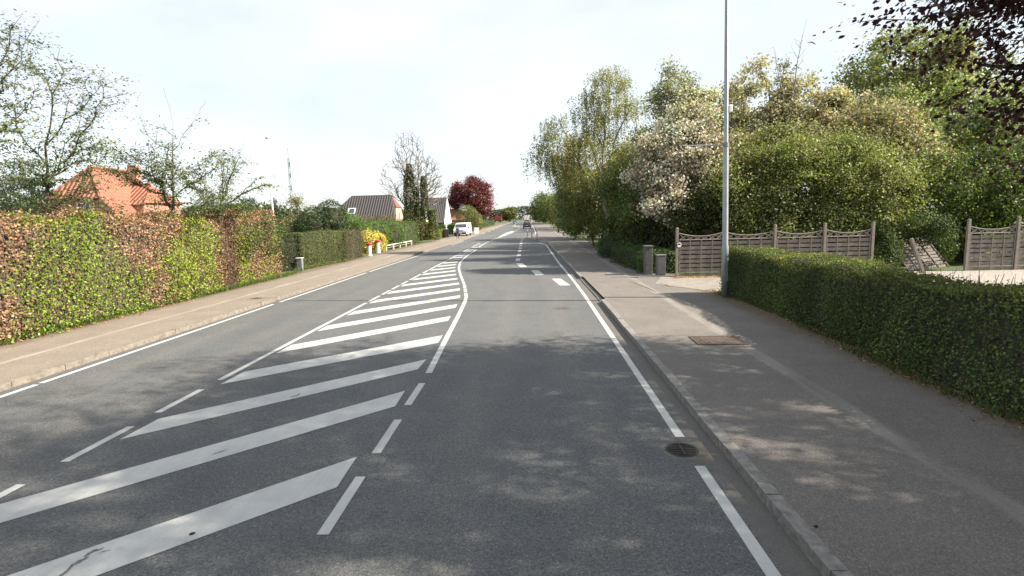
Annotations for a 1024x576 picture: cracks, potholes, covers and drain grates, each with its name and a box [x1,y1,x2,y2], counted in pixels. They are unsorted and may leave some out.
drain grate [665,443,699,457]
crack [59,547,107,576]
manhole cover [688,336,749,345]
